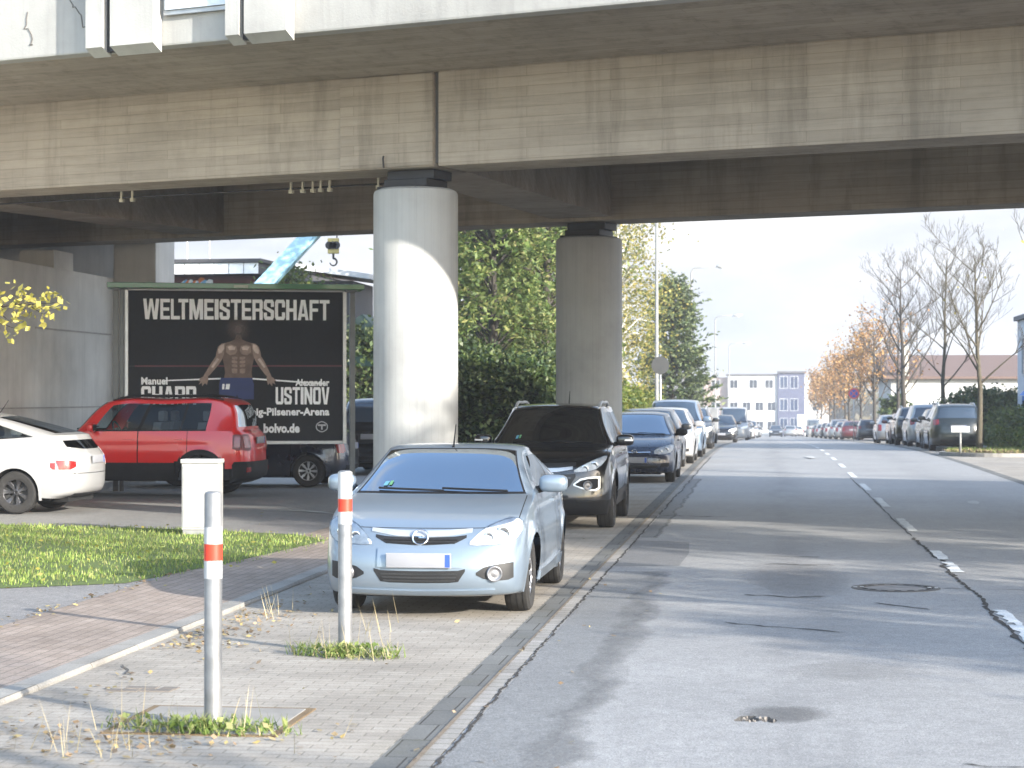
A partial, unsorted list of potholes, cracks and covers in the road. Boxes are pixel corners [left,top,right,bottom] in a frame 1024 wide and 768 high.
manhole cover [851,583,941,592]
